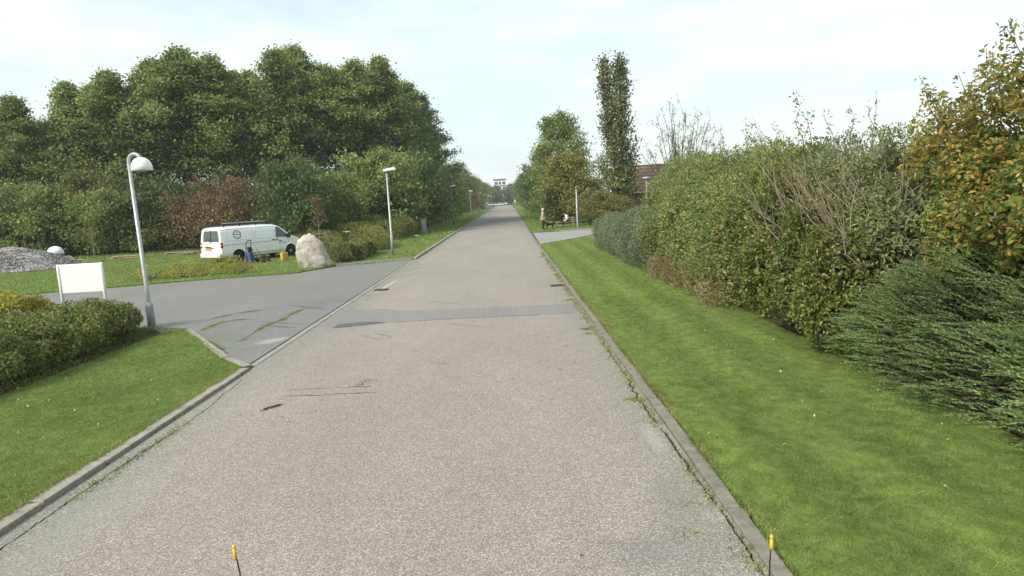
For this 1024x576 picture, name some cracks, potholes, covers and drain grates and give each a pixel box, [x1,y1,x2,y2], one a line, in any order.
crack [200,309,304,354]
crack [284,386,379,397]
crack [579,328,766,576]
